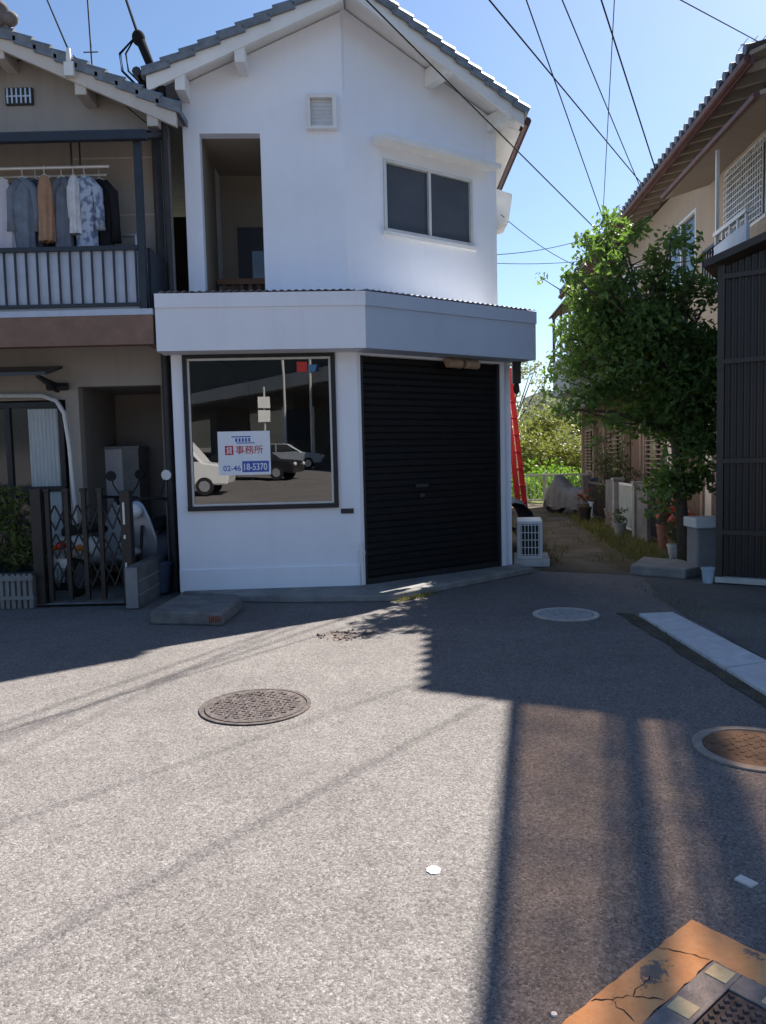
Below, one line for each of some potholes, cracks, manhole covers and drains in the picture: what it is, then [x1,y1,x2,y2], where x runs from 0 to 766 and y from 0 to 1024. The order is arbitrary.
manhole cover [533,607,599,622]
manhole cover [199,688,311,726]
pothole [317,629,376,641]
manhole cover [691,726,766,773]
crack [591,975,663,1022]
